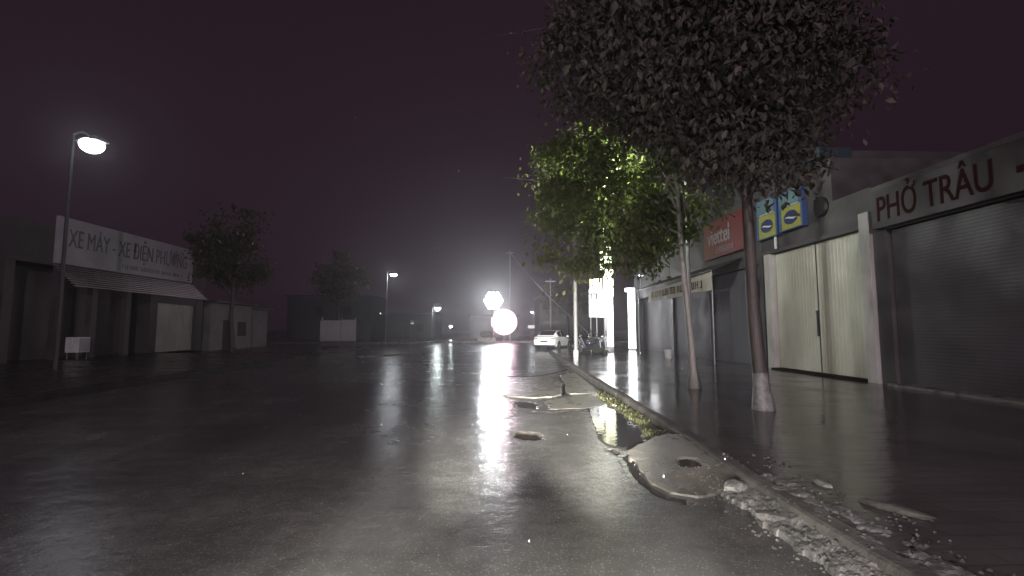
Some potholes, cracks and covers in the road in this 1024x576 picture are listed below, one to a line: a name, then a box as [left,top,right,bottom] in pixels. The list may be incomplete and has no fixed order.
pothole [513,401,541,410]
pothole [511,431,545,441]
pothole [679,459,702,467]
crack [502,369,593,414]
